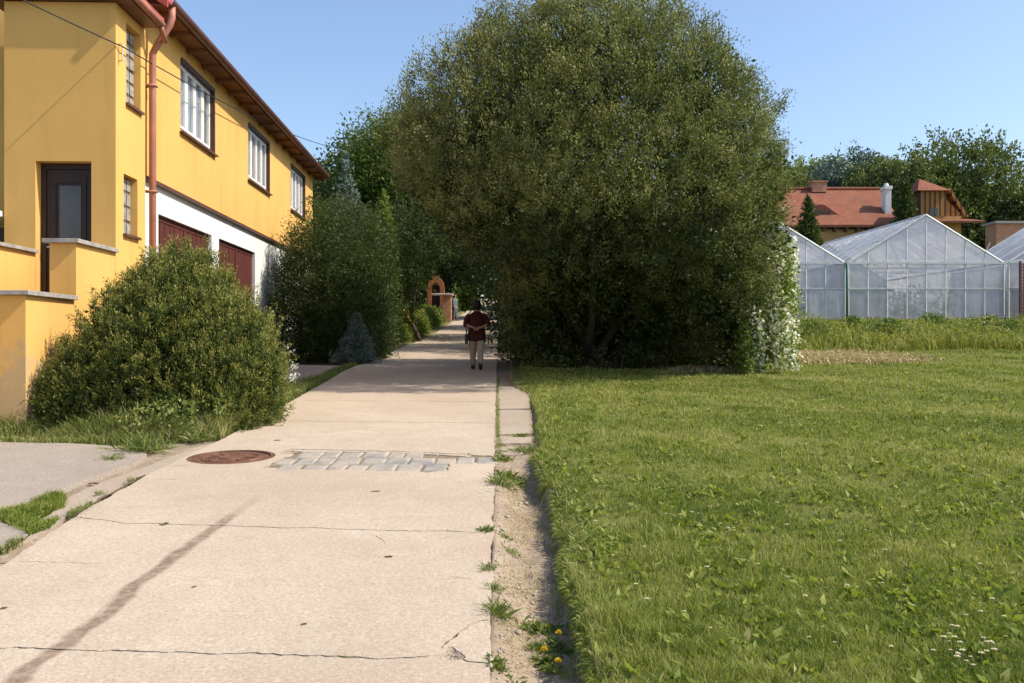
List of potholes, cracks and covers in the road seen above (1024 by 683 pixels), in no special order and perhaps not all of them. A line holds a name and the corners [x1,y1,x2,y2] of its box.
manhole cover [187,450,275,464]
